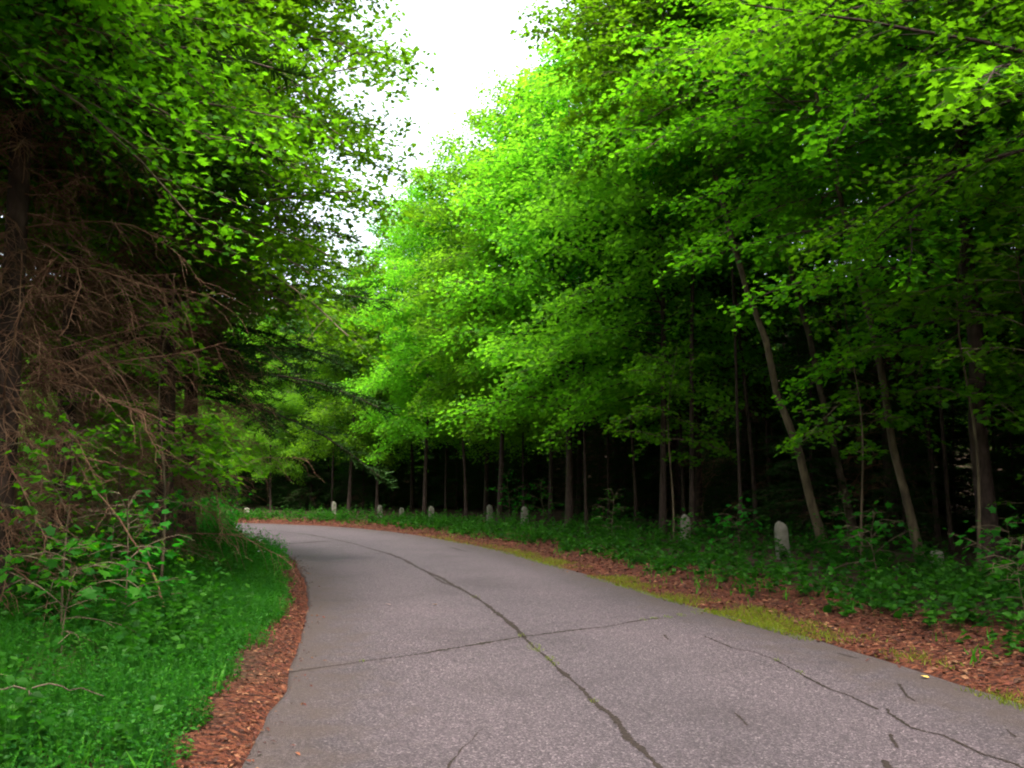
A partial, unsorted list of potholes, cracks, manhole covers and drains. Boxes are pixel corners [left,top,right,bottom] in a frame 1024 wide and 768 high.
crack [705,636,1024,768]
crack [239,528,709,768]
